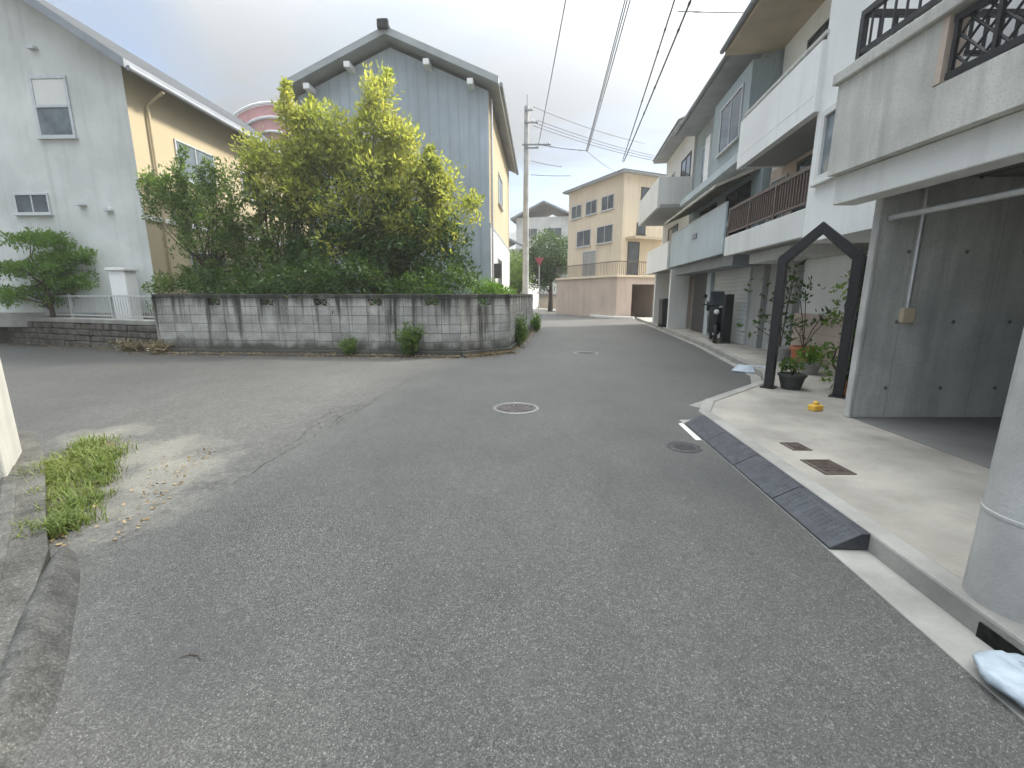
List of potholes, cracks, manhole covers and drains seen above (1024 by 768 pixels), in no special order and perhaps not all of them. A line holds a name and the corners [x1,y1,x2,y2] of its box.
drain grate [976,622,1024,656]
crack [180,374,418,509]
utility cover [667,441,702,453]
manhole cover [493,402,539,414]
